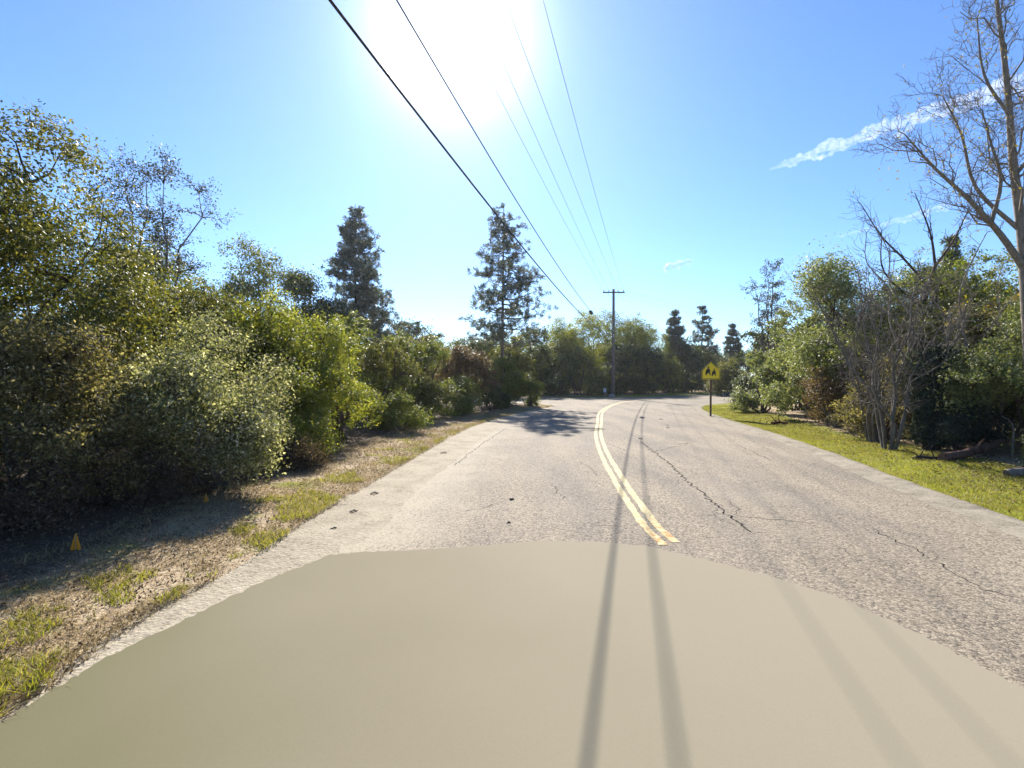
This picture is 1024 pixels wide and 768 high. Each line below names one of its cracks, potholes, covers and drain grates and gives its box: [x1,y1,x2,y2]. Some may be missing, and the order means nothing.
crack [867,527,1022,599]
crack [607,425,816,533]
